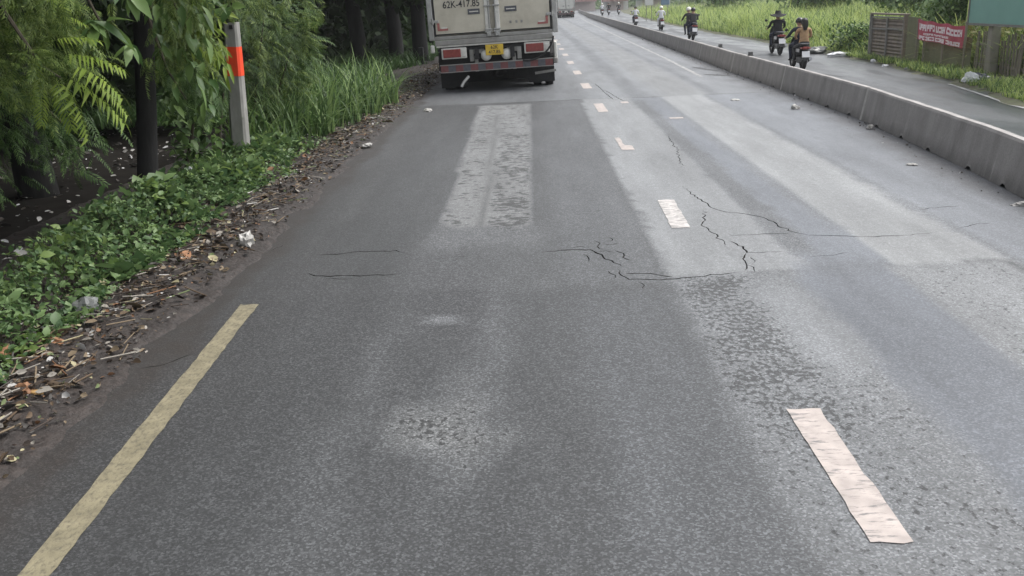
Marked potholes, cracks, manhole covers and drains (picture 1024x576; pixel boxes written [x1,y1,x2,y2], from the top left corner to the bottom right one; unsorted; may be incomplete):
crack [546,191,926,288]
